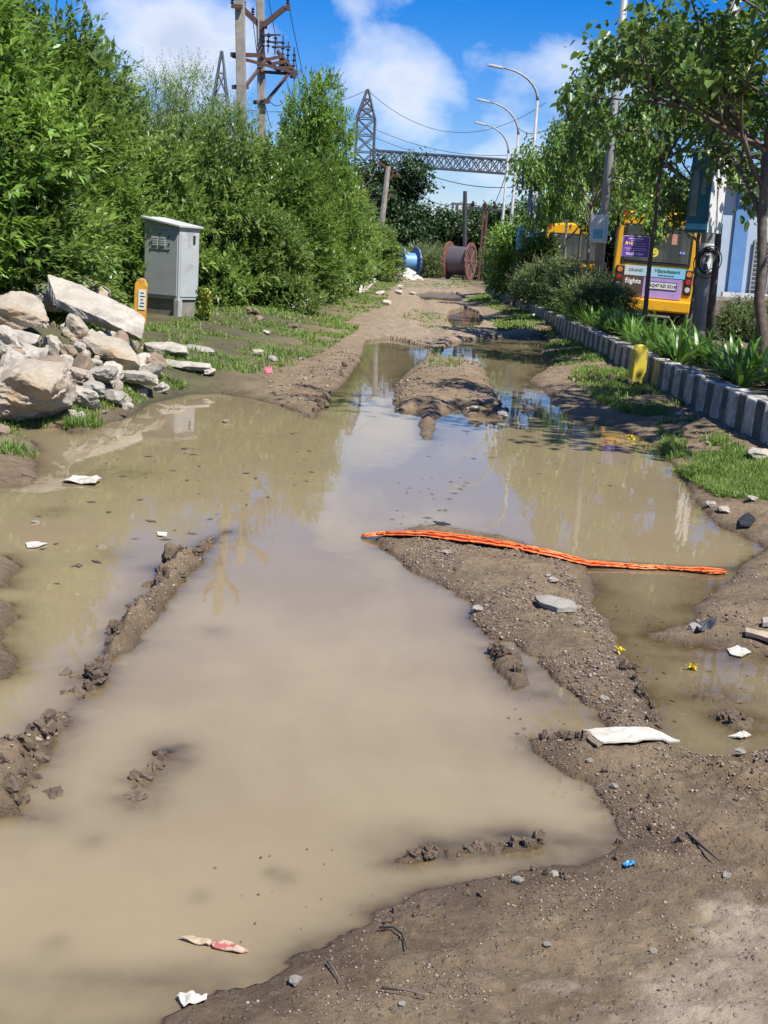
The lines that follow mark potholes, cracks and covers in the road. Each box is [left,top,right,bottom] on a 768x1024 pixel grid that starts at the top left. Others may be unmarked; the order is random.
pothole [327,339,447,396]
pothole [0,389,768,1024]
pothole [415,295,483,318]
